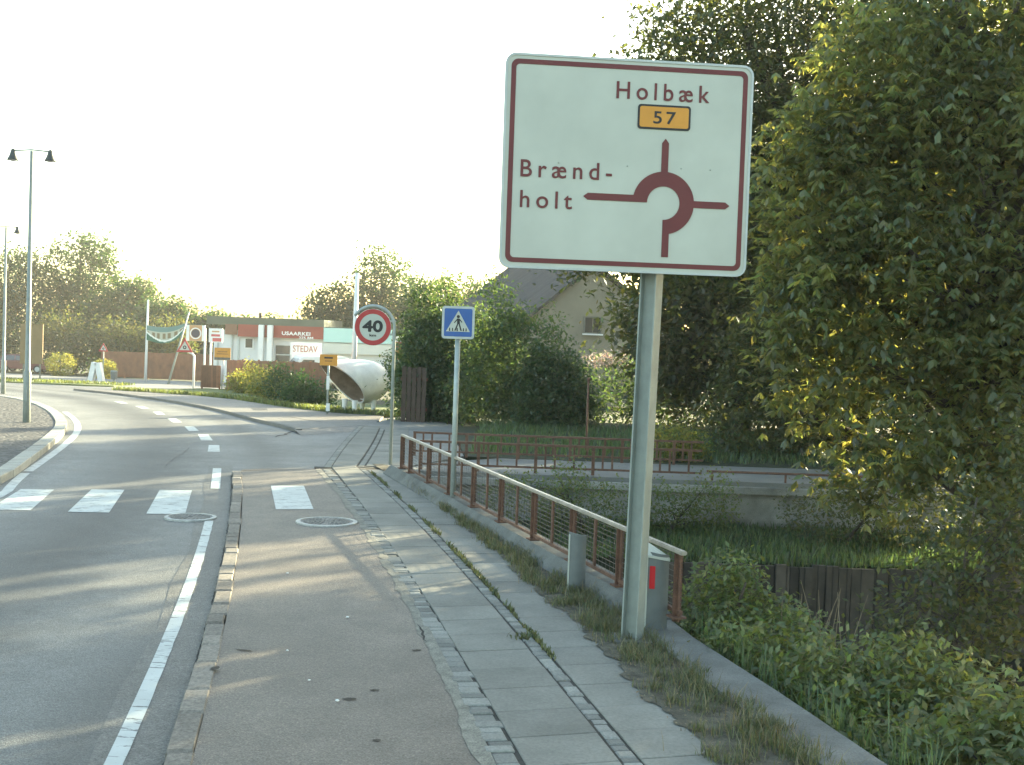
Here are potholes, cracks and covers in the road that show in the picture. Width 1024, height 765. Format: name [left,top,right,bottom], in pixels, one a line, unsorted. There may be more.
manhole cover [296,517,358,527]
manhole cover [164,513,217,522]
